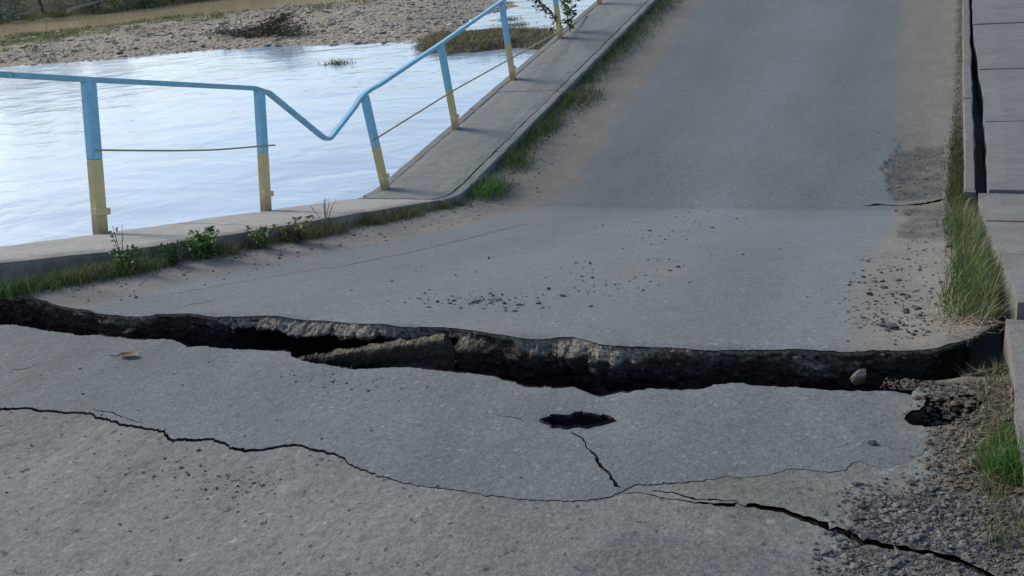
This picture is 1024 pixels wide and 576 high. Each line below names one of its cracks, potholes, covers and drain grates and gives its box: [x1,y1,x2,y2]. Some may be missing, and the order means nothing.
pothole [904,391,980,427]
crack [0,295,1007,576]
